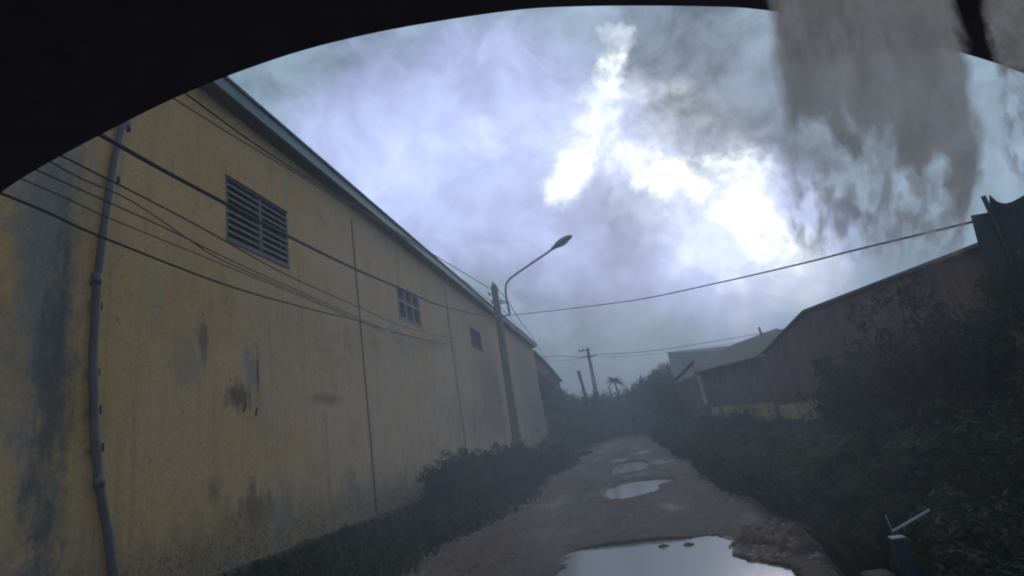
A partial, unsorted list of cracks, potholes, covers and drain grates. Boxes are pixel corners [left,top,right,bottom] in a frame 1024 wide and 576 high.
pothole [594,475,680,501]
pothole [536,529,835,576]
pothole [603,459,656,475]
